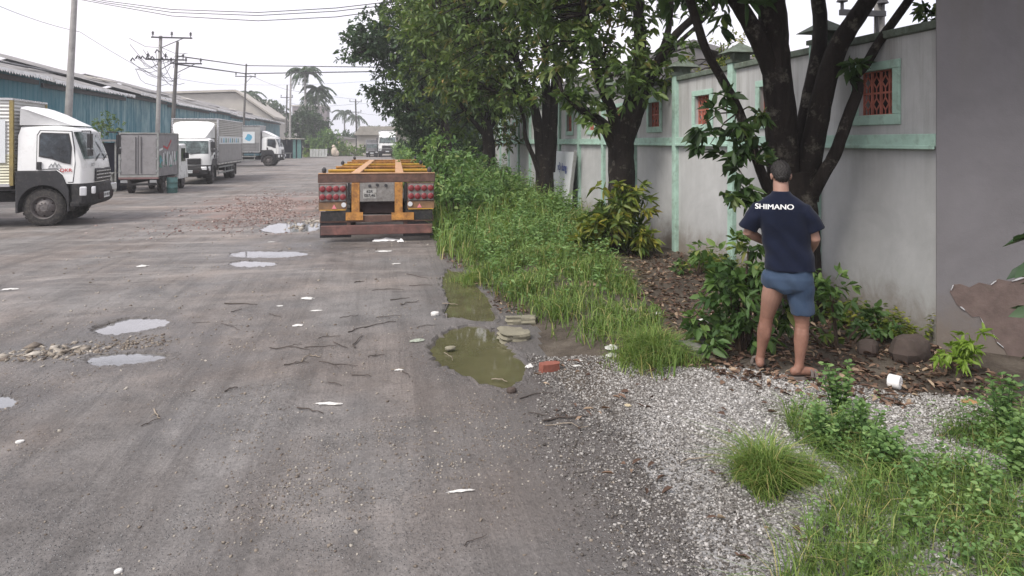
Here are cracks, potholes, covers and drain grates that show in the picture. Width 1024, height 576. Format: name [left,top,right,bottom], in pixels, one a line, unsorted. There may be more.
pothole [81,315,178,337]
pothole [0,392,28,411]
pothole [223,259,285,268]
pothole [438,266,502,324]
pothole [74,349,181,369]
pothole [418,323,534,392]
pothole [254,221,320,234]
pothole [221,249,315,259]
